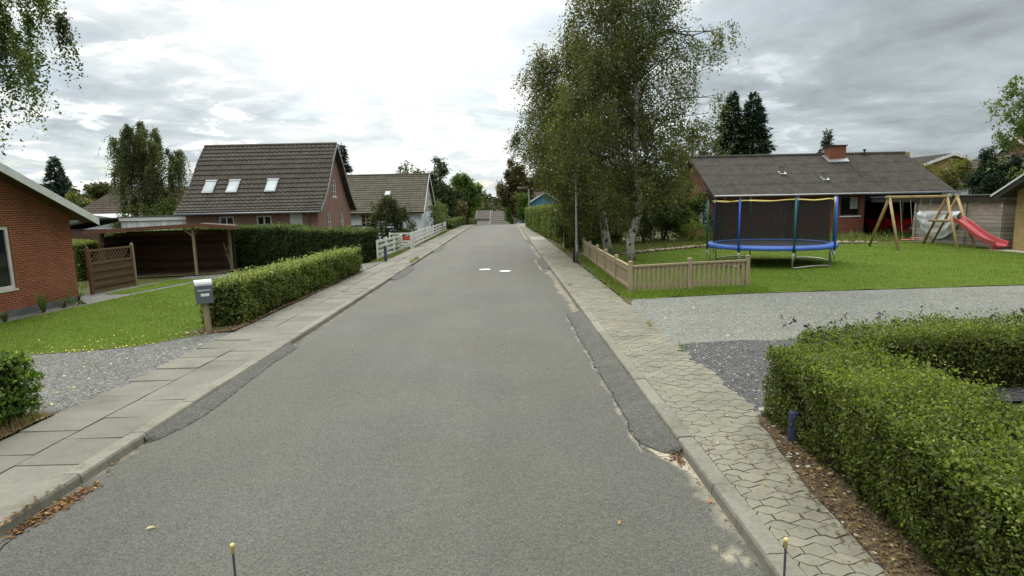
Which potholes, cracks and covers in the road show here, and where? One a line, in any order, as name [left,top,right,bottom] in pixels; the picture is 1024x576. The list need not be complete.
crack [566,315,669,457]
